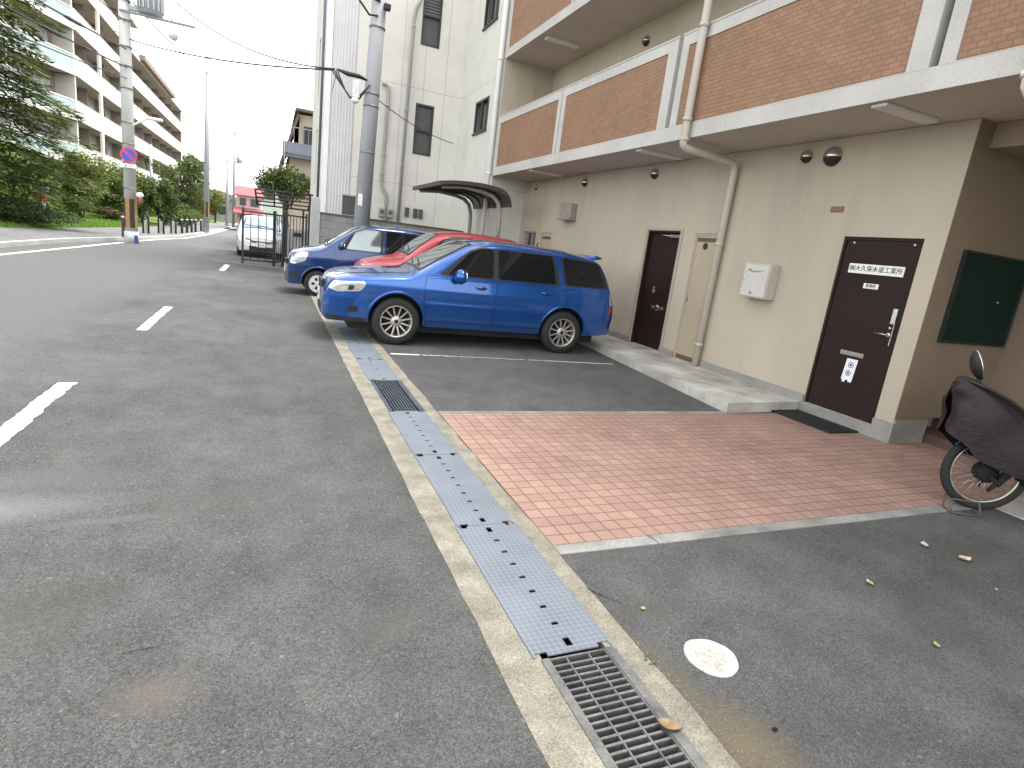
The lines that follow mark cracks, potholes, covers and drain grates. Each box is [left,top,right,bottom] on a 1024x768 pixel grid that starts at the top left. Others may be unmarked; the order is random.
drain grate [541,646,711,768]
drain grate [370,380,425,414]
